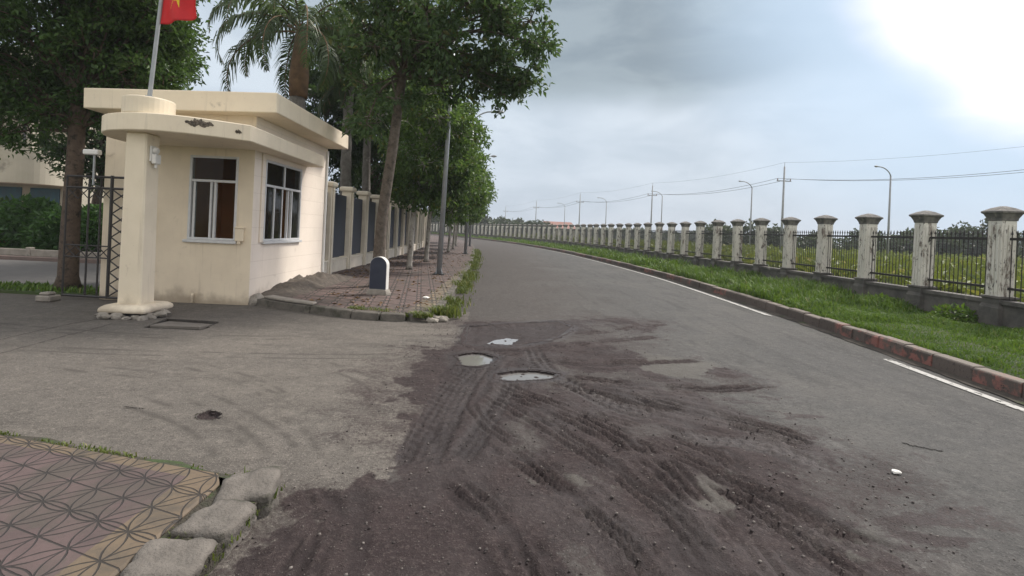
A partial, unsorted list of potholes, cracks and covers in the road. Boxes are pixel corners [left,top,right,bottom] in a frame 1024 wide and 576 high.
pothole [195,409,224,420]
pothole [492,369,563,382]
manhole cover [145,318,219,330]
pothole [453,352,499,367]
